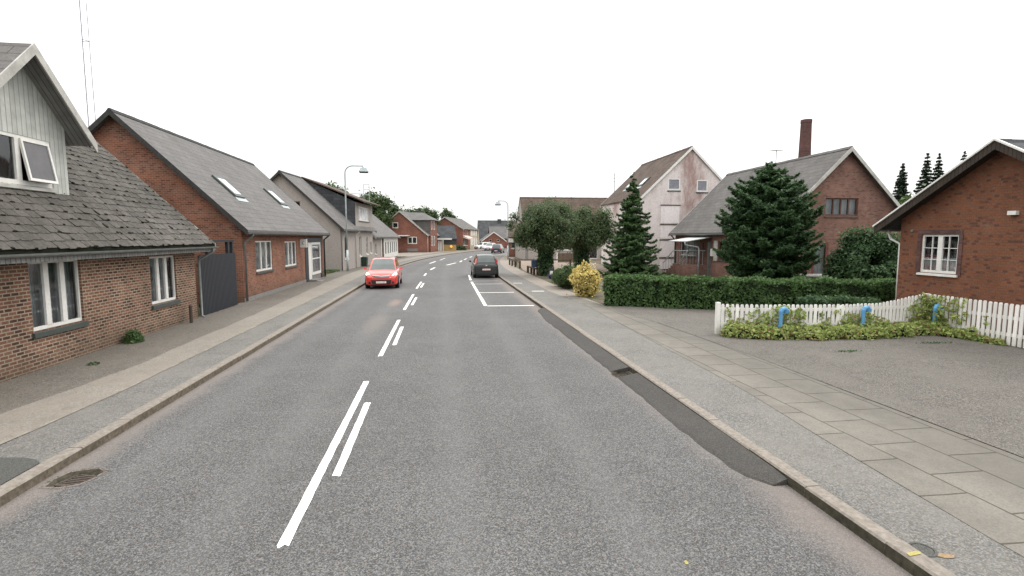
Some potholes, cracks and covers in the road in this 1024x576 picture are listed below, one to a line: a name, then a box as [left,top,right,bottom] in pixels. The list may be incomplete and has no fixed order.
drain grate [38,466,109,489]
manhole cover [908,542,938,558]
